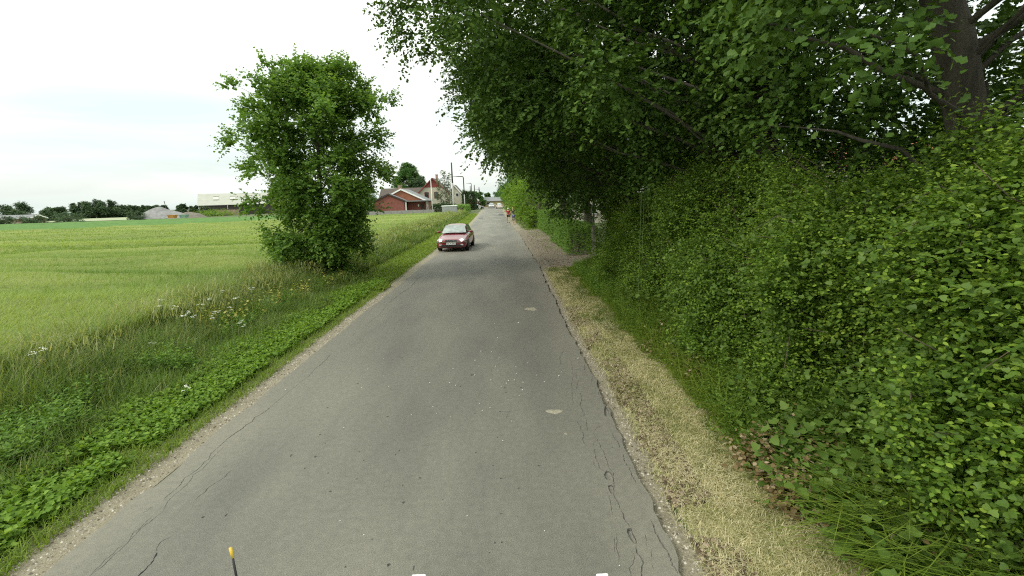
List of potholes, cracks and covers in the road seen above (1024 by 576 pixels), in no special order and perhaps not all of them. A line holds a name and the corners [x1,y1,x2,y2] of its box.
crack [559,352,678,576]
crack [91,355,330,575]
